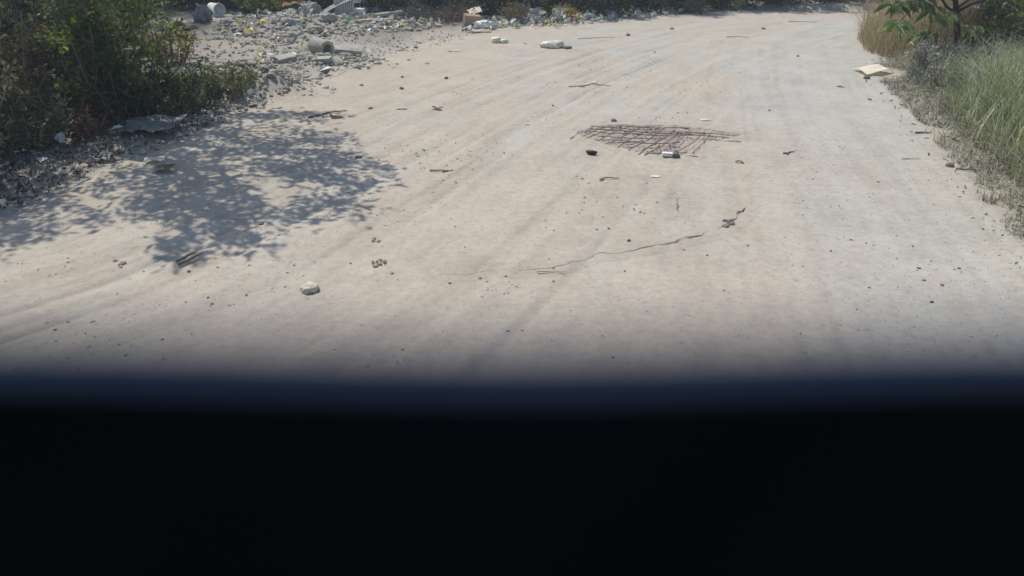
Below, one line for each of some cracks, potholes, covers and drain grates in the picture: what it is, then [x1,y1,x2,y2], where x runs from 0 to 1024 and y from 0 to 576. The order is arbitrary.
crack [422,189,763,283]
